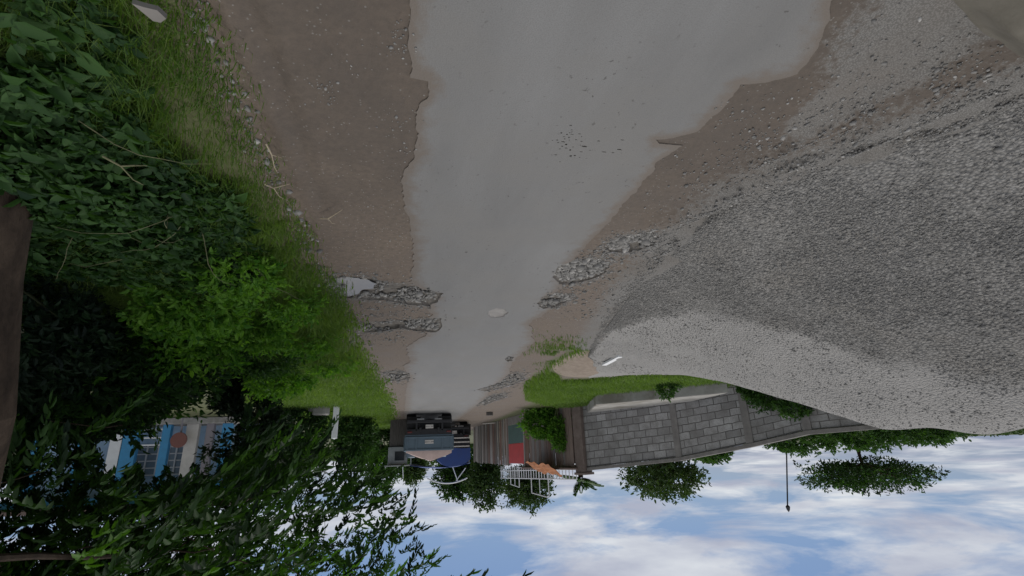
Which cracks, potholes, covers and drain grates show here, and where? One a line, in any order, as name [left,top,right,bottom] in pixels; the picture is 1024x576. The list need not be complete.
pothole [537,293,571,309]
pothole [354,318,442,333]
pothole [331,277,444,307]
pothole [552,258,610,284]
pothole [477,372,525,391]
pothole [383,371,410,381]
